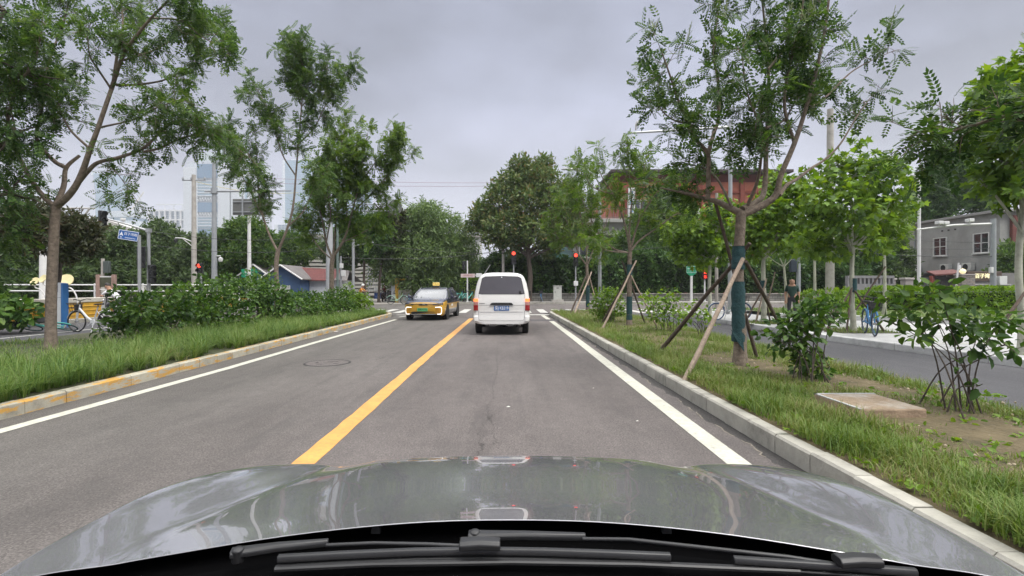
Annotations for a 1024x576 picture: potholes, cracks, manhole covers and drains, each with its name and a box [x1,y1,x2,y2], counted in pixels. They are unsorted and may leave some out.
crack [472,342,505,456]
